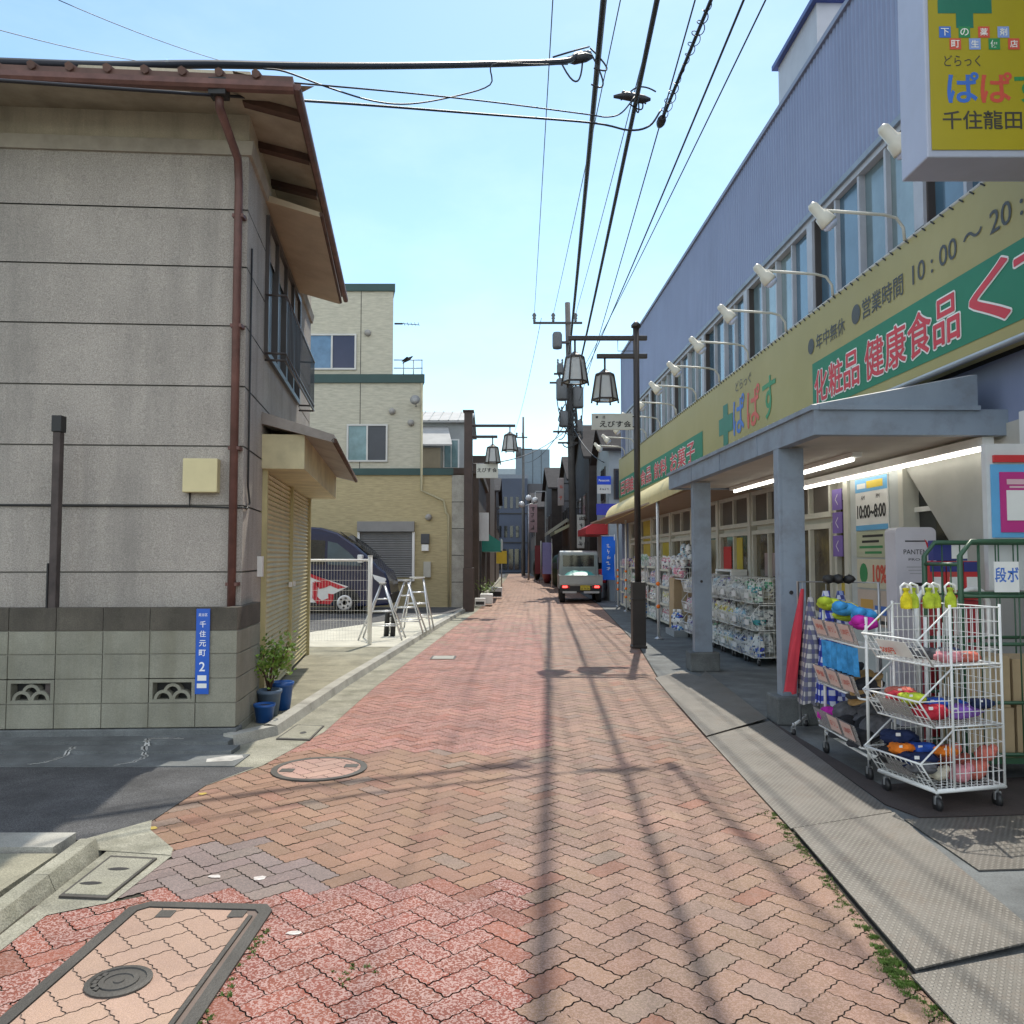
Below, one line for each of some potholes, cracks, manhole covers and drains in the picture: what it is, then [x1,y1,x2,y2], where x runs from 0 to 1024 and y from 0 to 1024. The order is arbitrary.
manhole cover [270,757,367,783]
crack [114,737,184,766]
crack [29,746,75,765]
manhole cover [0,901,272,1024]
